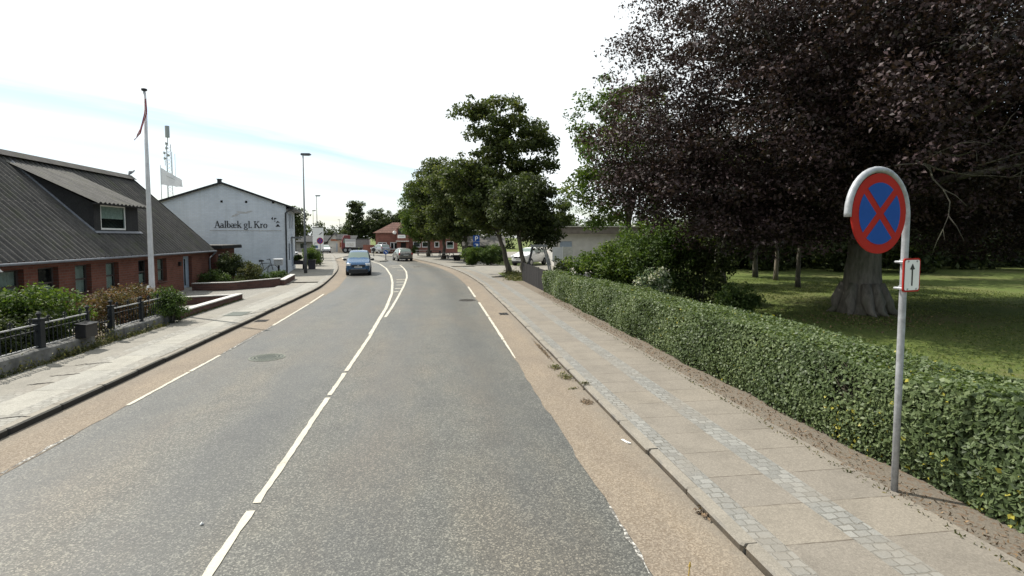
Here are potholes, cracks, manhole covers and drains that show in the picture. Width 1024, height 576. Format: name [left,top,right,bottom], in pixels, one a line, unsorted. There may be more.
manhole cover [248,353,286,361]
